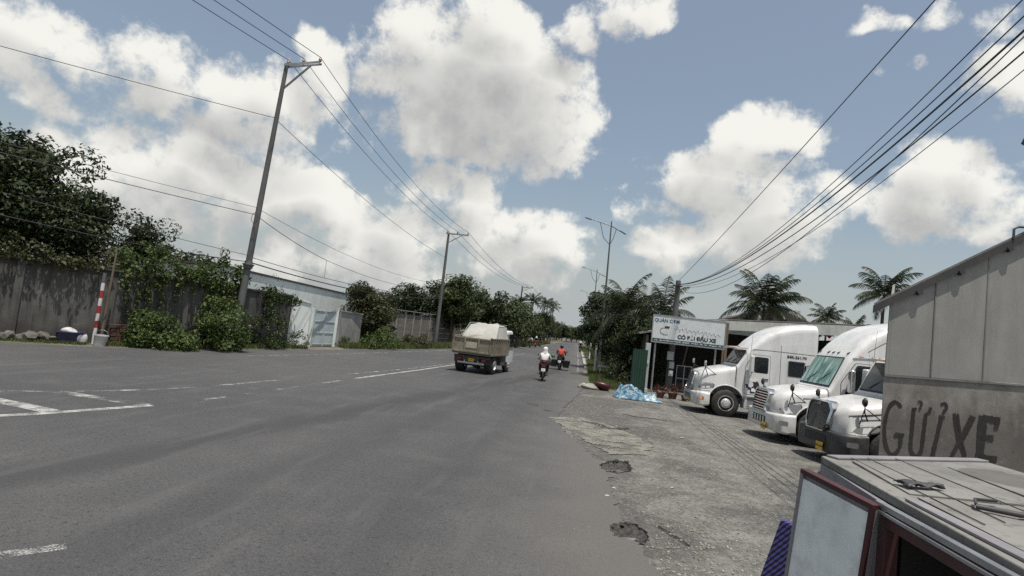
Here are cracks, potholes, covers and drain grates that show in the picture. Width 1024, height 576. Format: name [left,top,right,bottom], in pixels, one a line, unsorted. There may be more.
crack [658,526,690,546]
pothole [599,459,633,474]
pothole [610,522,650,546]
